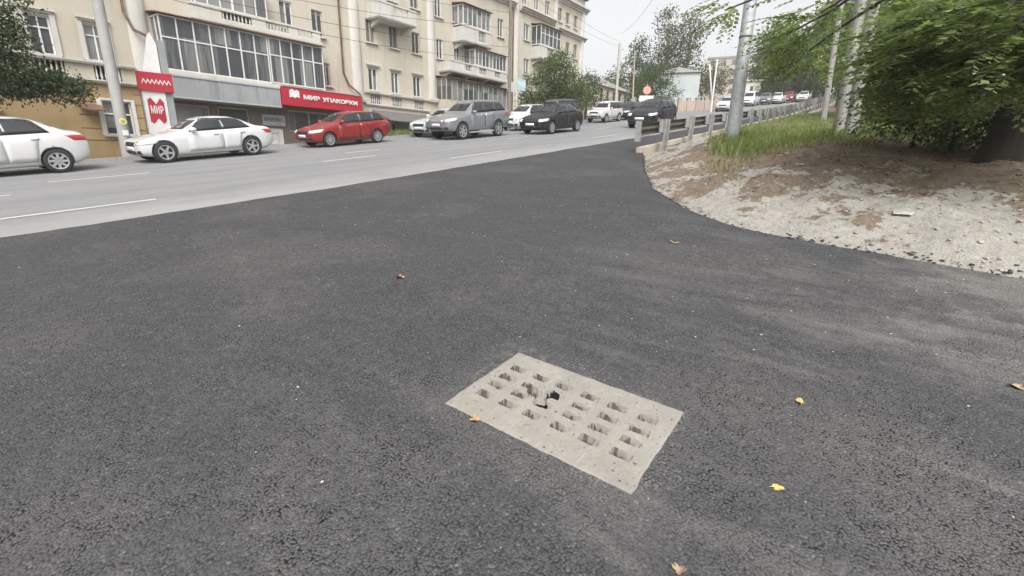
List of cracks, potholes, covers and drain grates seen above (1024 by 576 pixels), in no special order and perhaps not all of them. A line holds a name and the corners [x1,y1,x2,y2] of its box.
drain grate [445,353,684,495]
